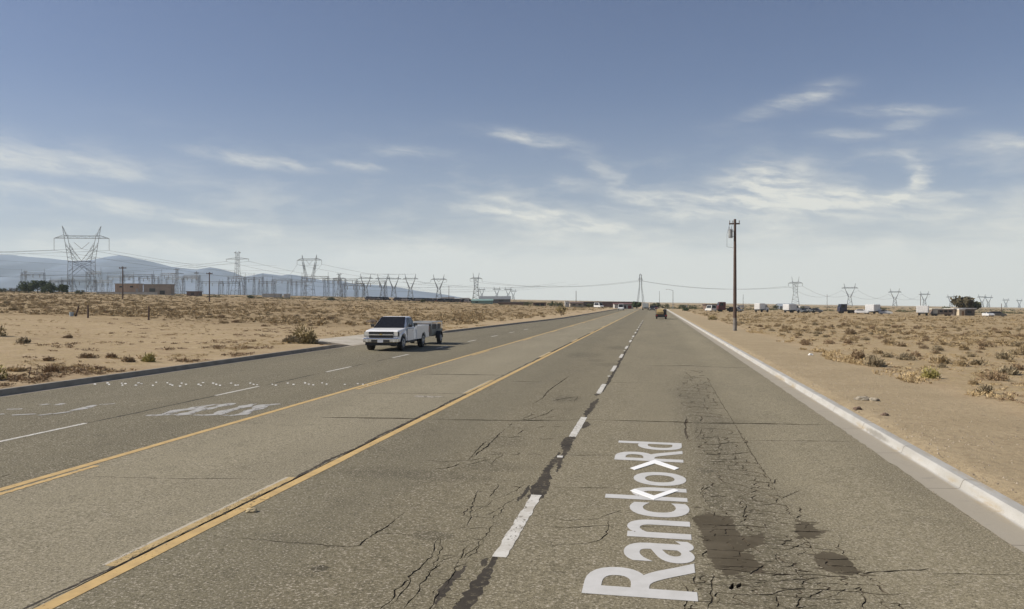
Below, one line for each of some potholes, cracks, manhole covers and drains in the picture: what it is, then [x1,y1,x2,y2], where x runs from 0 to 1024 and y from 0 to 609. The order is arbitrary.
crack [587,366,823,441]
crack [682,427,1021,609]
crack [32,376,578,609]
